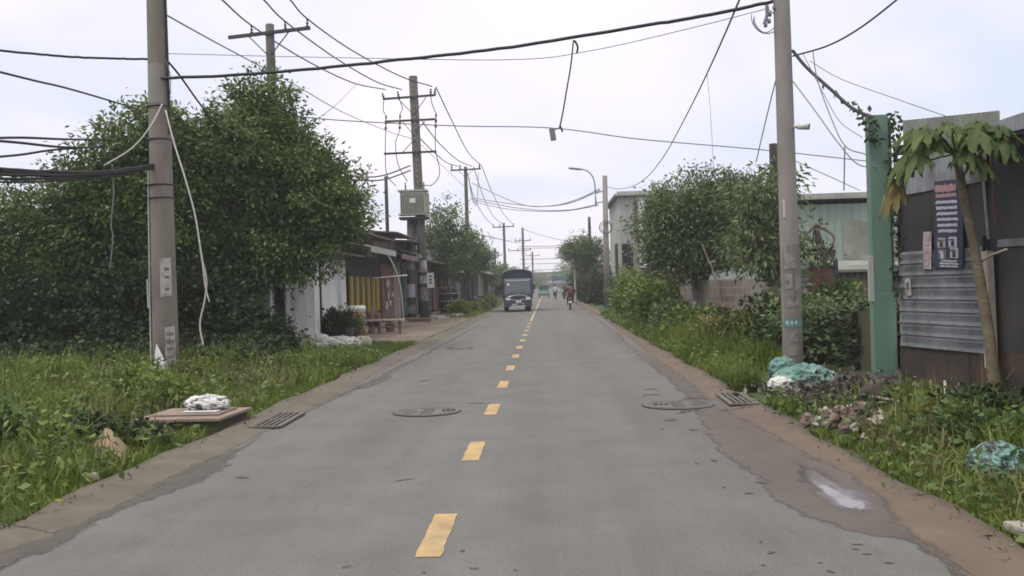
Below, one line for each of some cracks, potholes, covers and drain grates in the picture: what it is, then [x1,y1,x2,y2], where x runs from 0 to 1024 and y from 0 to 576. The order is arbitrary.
manhole cover [642,400,715,410]
manhole cover [392,407,462,417]
drain grate [715,392,760,405]
drain grate [248,412,306,428]
